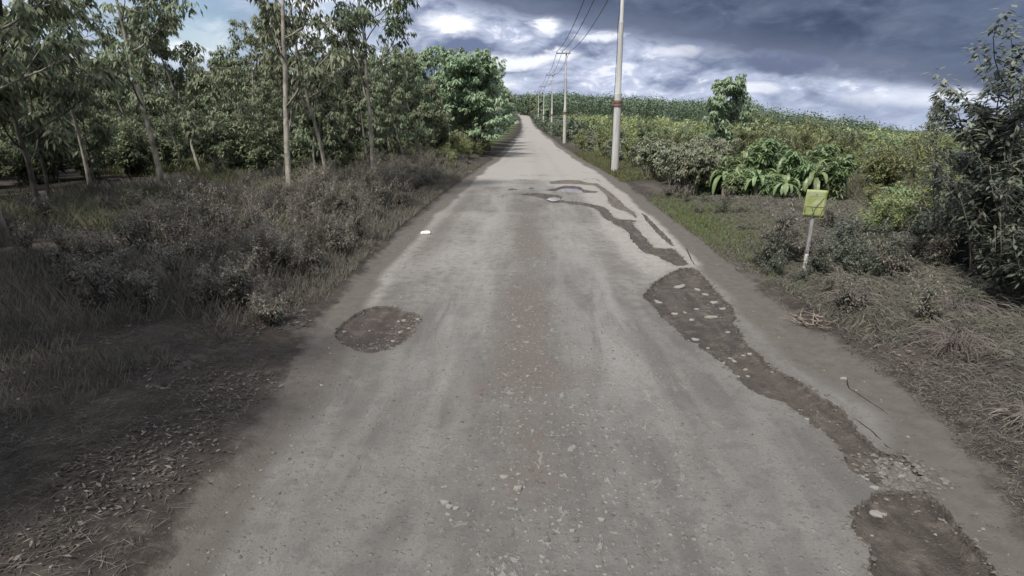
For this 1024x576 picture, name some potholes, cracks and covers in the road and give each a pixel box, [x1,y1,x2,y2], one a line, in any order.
pothole [643,267,924,485]
pothole [849,490,996,576]
crack [847,381,890,449]
pothole [520,193,688,266]
pothole [550,180,637,218]
pothole [333,306,422,353]
